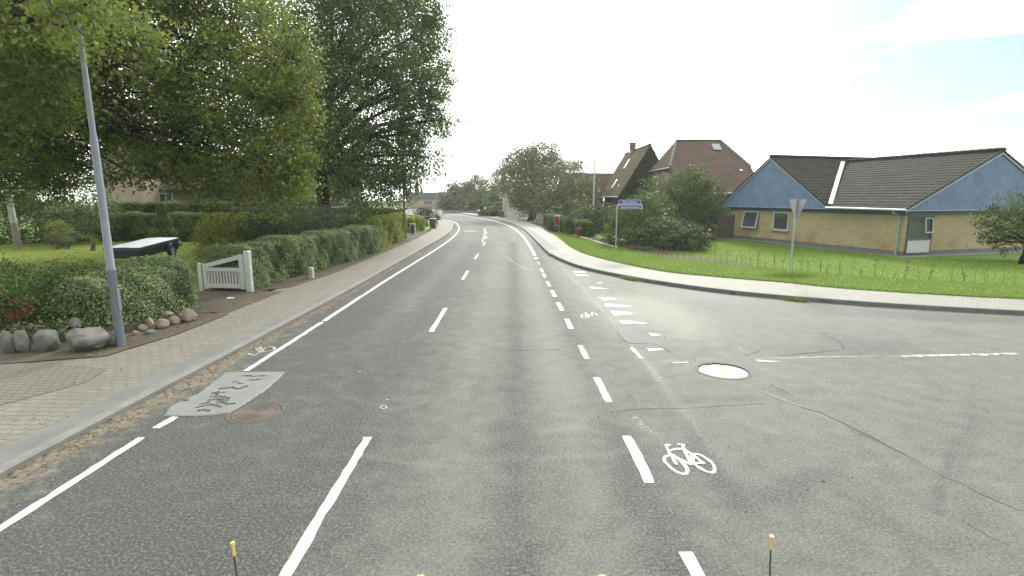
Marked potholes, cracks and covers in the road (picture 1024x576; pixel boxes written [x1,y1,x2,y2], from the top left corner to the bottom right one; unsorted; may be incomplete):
manhole cover [695,362,753,380]
manhole cover [225,402,286,424]
crack [755,386,1023,511]
